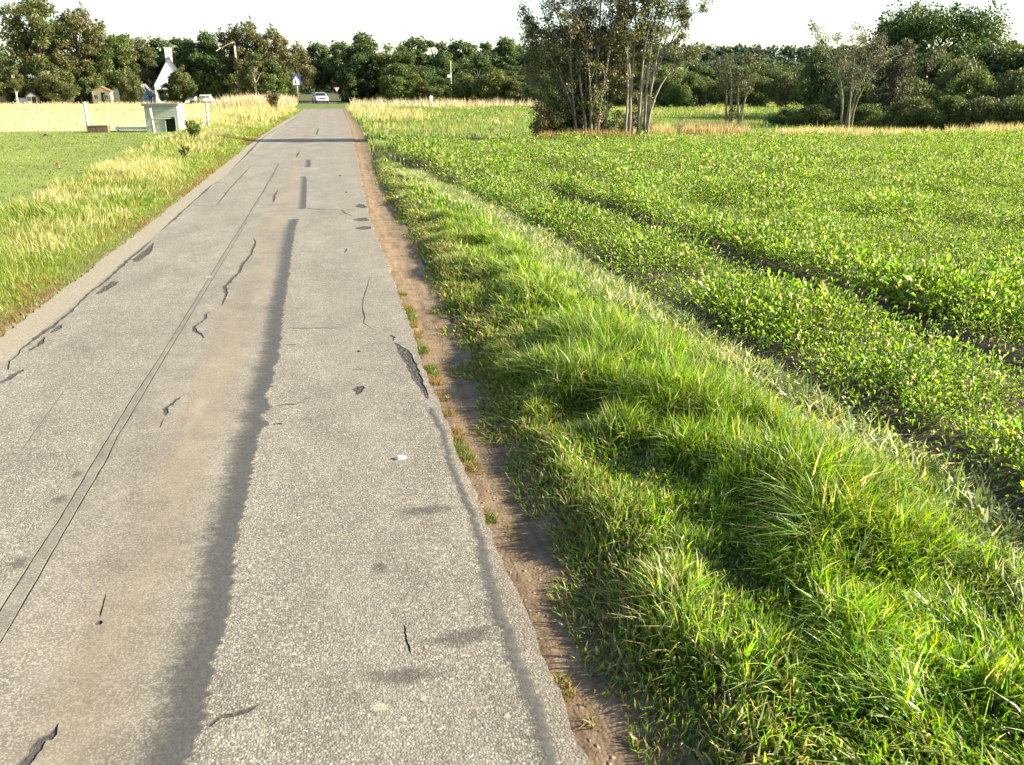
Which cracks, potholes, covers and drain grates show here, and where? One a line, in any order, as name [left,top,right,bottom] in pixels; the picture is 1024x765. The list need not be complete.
crack [16,723,59,765]
crack [0,116,298,467]
pothole [393,342,429,399]
